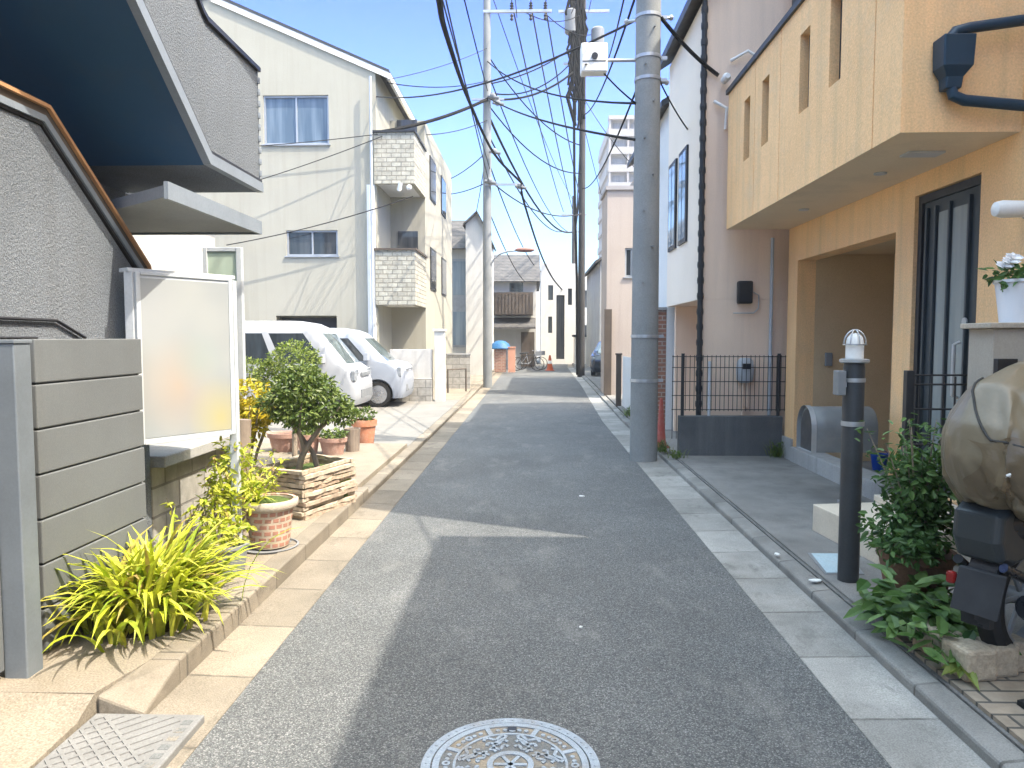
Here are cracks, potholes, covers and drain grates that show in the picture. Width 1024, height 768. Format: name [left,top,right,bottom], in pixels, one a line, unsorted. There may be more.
manhole cover [420,718,600,768]
